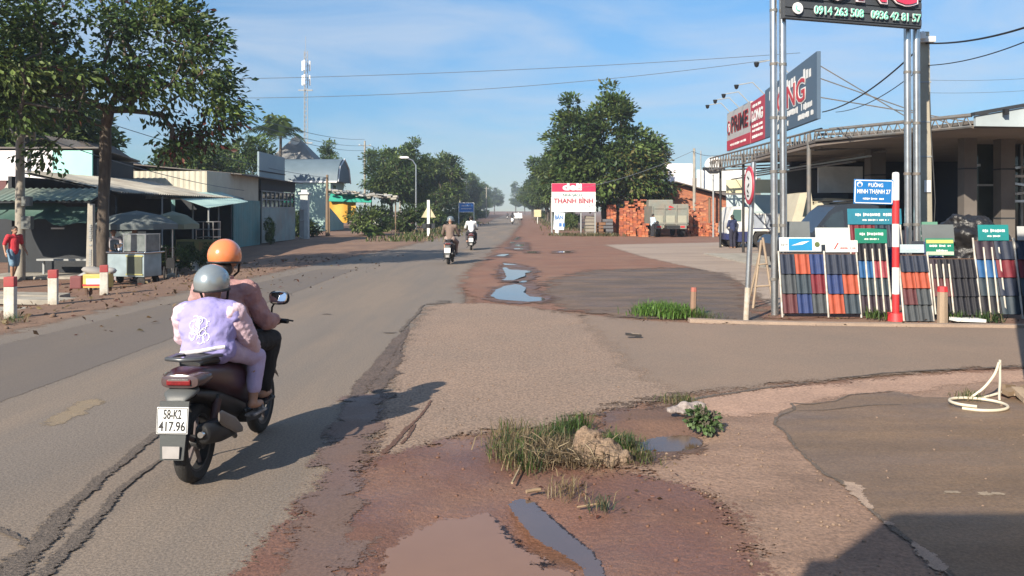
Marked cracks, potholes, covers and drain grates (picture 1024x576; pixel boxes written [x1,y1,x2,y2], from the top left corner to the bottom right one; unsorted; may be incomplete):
pothole [490,262,545,283]
crack [691,366,1024,576]
pothole [480,280,561,304]
pothole [506,242,531,251]
crack [0,432,160,576]
